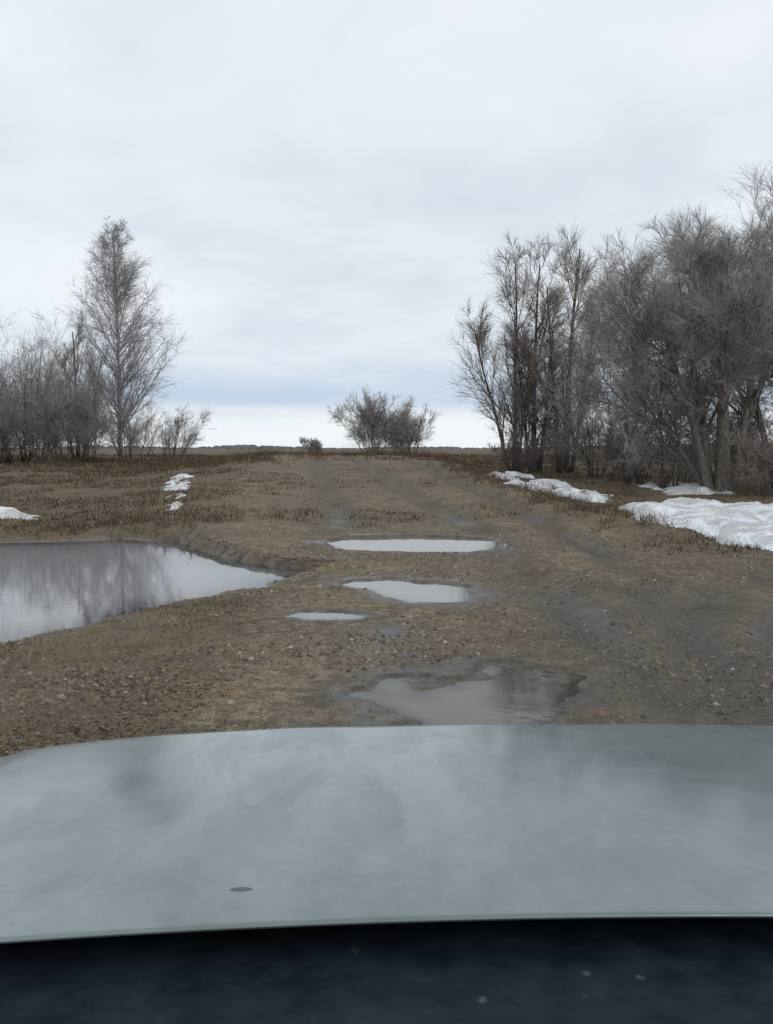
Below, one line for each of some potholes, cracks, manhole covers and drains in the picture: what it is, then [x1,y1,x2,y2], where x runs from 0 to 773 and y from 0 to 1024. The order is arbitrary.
pothole [325,656,633,726]
pothole [320,576,499,605]
pothole [257,605,389,624]
pothole [308,533,527,554]
